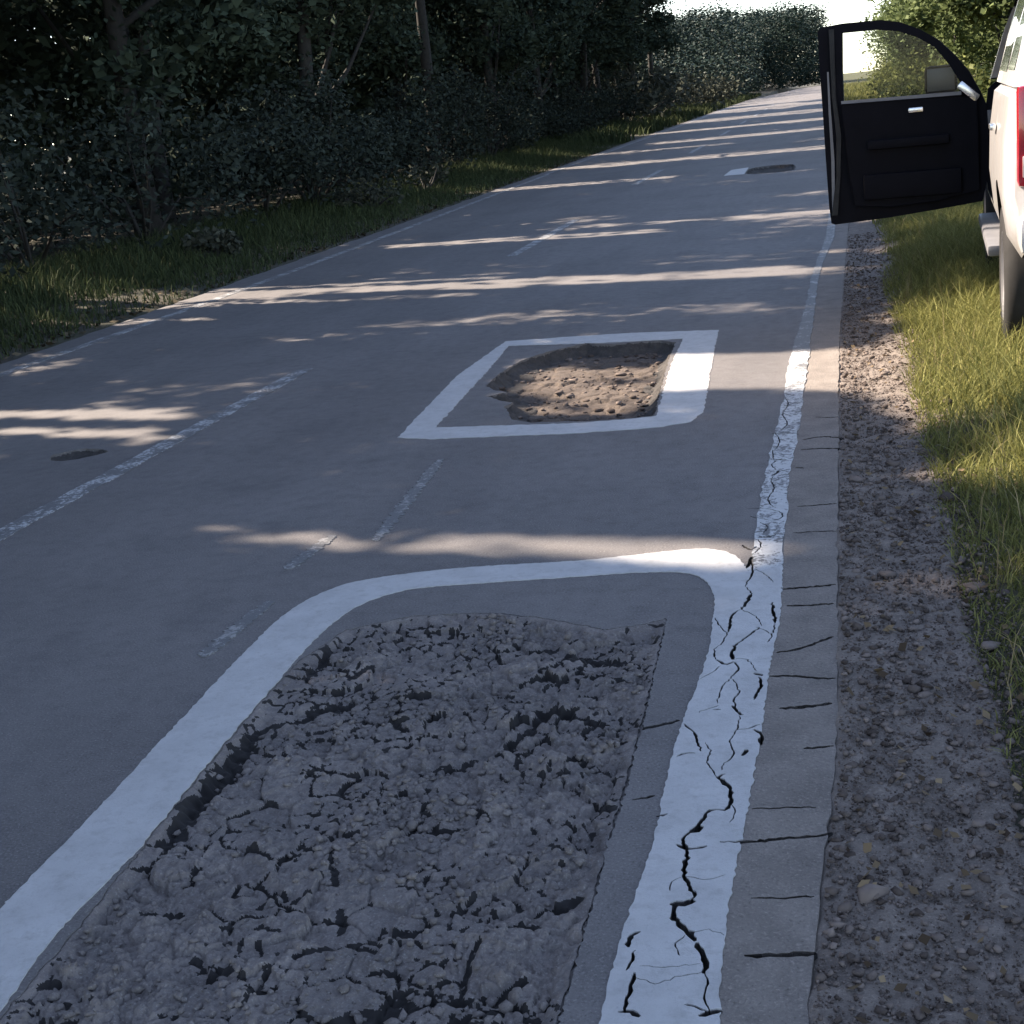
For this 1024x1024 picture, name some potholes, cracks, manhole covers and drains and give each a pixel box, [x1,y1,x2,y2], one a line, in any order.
pothole [487,342,675,423]
crack [0,401,845,1024]
pothole [51,450,106,461]
